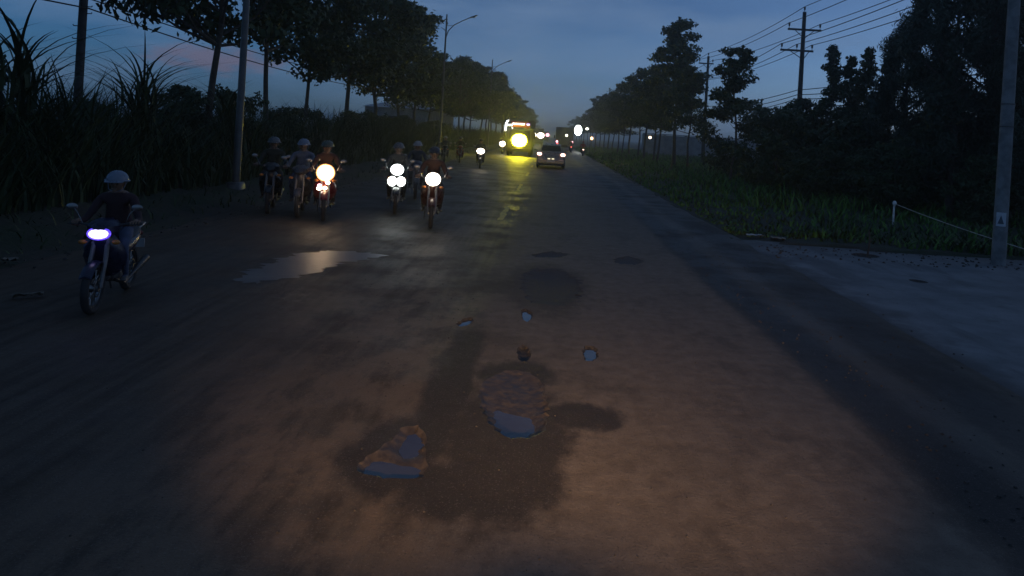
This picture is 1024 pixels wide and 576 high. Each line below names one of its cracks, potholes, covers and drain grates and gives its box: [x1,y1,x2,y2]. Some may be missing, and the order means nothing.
pothole [478,370,550,439]
pothole [582,346,599,361]
pothole [521,309,533,322]
pothole [357,425,429,479]
pothole [456,317,474,326]
pothole [516,344,531,362]
